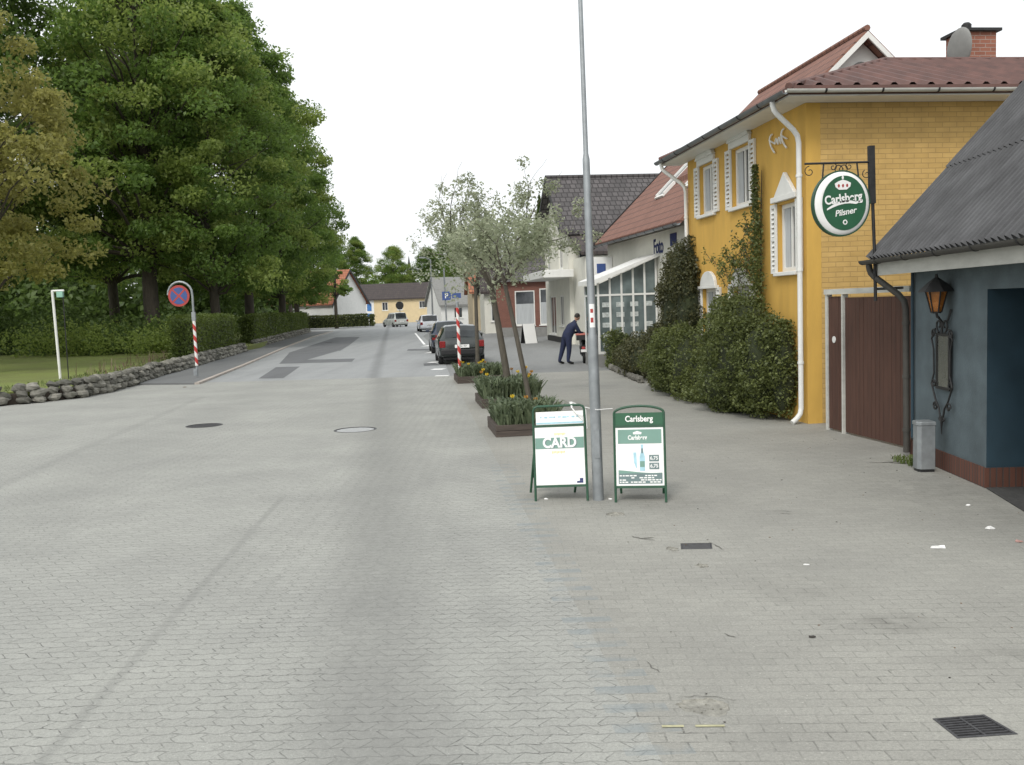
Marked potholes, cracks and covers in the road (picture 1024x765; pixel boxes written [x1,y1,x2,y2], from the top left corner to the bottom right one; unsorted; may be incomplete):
drain grate [933,714,1018,739]
